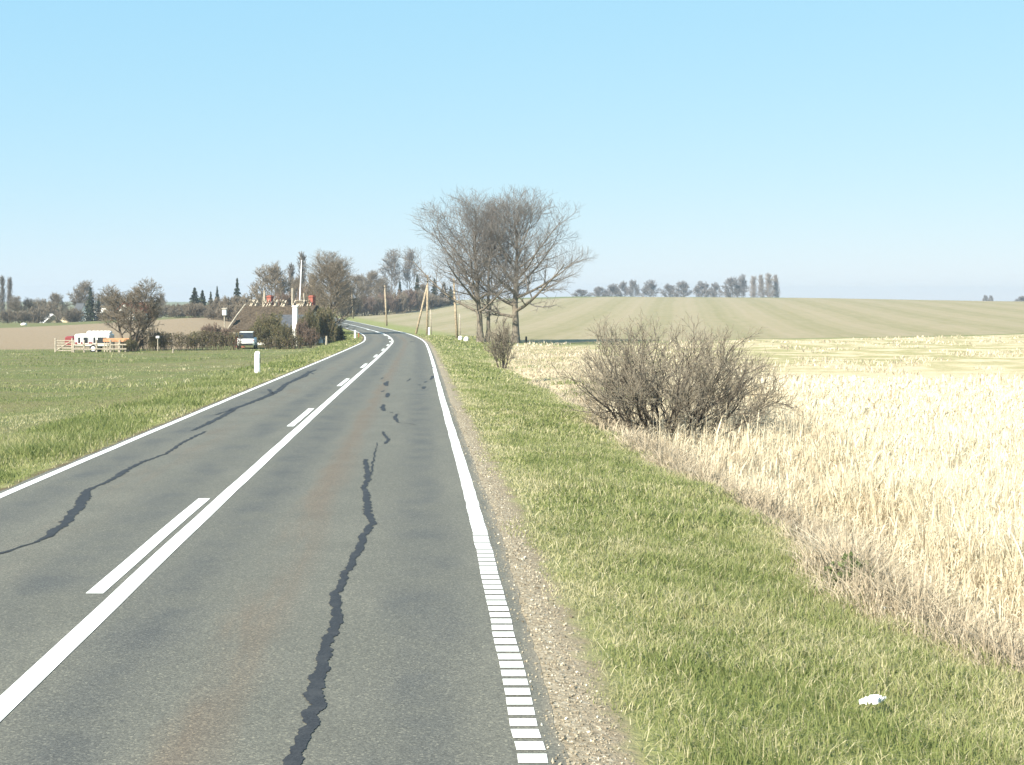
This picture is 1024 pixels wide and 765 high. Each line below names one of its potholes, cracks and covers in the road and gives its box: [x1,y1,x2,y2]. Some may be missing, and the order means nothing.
crack [379,377,390,411]
